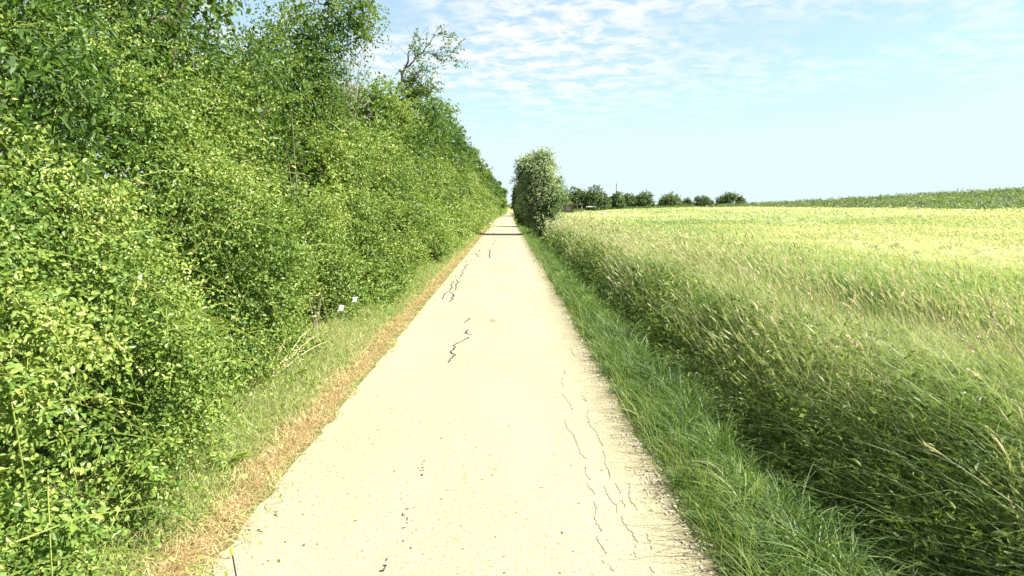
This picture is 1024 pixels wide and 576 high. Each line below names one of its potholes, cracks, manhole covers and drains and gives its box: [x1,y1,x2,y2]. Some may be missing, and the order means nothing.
crack [562,352,655,573]
